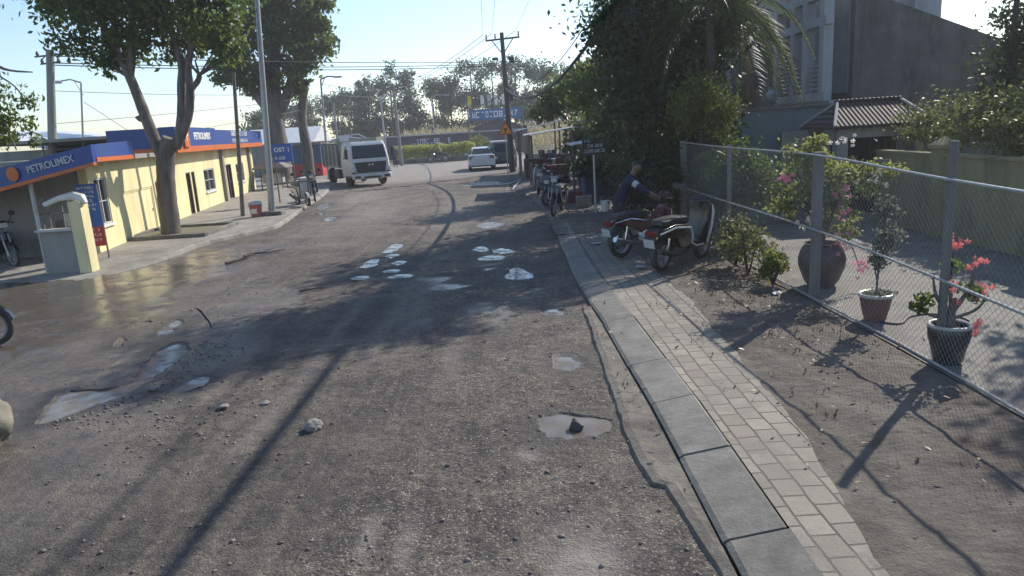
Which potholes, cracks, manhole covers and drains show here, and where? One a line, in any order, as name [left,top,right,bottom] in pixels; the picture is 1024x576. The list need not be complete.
pothole [552,352,588,371]
pothole [360,258,380,268]
pothole [160,374,215,396]
pothole [34,341,192,424]
pothole [382,244,404,253]
pothole [504,267,534,280]
pothole [533,412,613,440]
